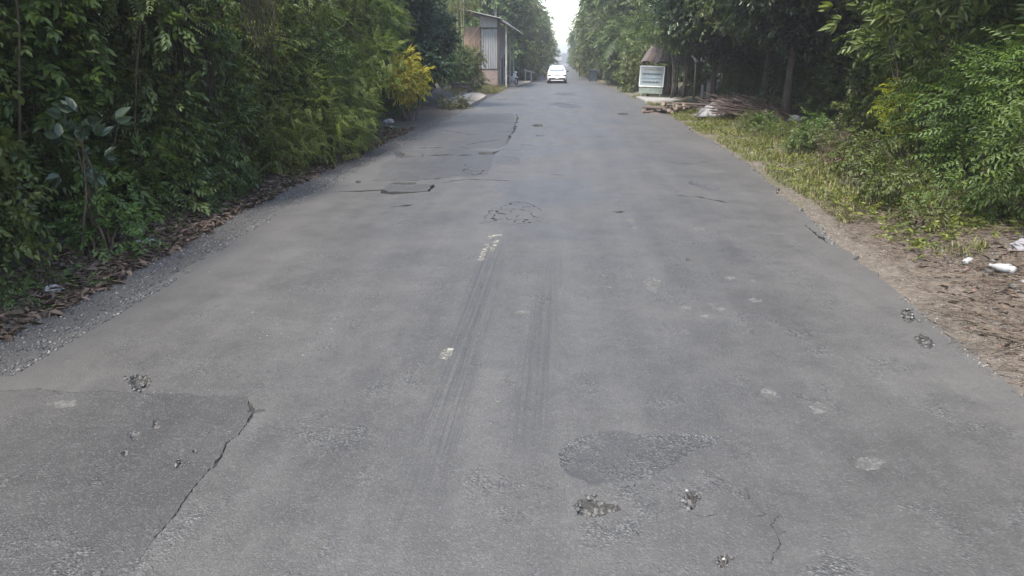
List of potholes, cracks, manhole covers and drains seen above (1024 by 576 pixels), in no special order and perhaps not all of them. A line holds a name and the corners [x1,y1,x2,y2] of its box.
pothole [680,488,701,510]
pothole [123,374,154,393]
crack [740,488,786,564]
pothole [572,493,621,520]
crack [133,400,265,571]
crack [339,99,534,207]
pothole [715,553,734,568]
pothole [901,308,923,325]
crack [480,203,541,225]
pothole [914,333,936,349]
